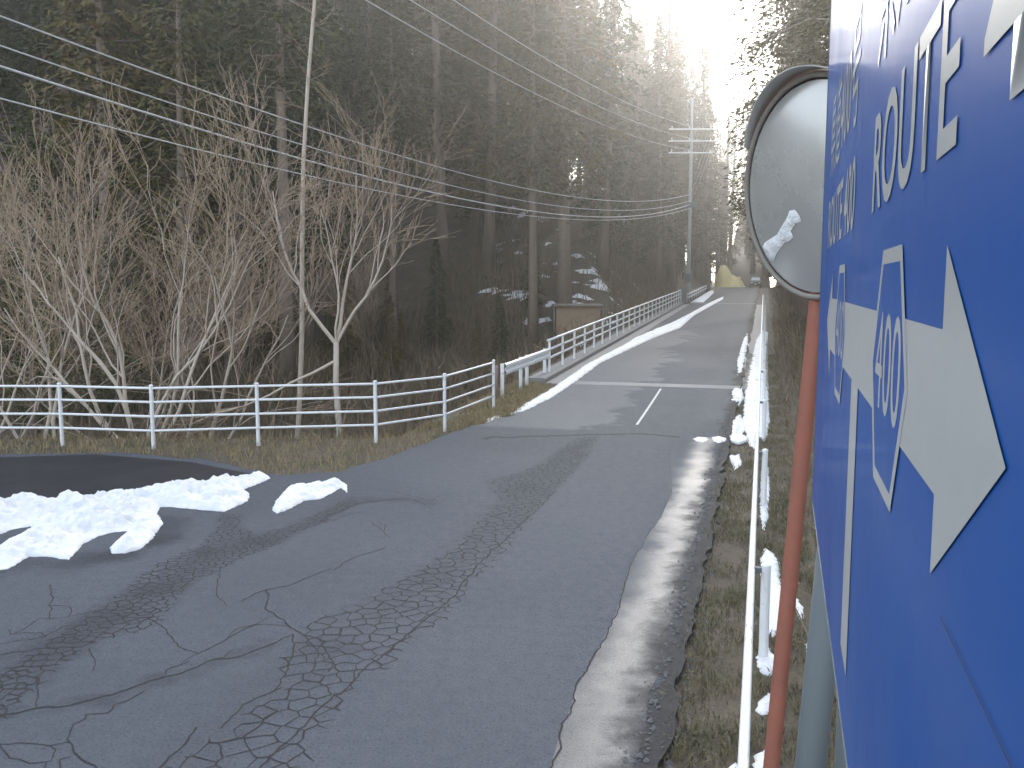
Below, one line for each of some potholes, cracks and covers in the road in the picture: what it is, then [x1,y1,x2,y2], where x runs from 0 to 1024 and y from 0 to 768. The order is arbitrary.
crack [0,433,731,768]
